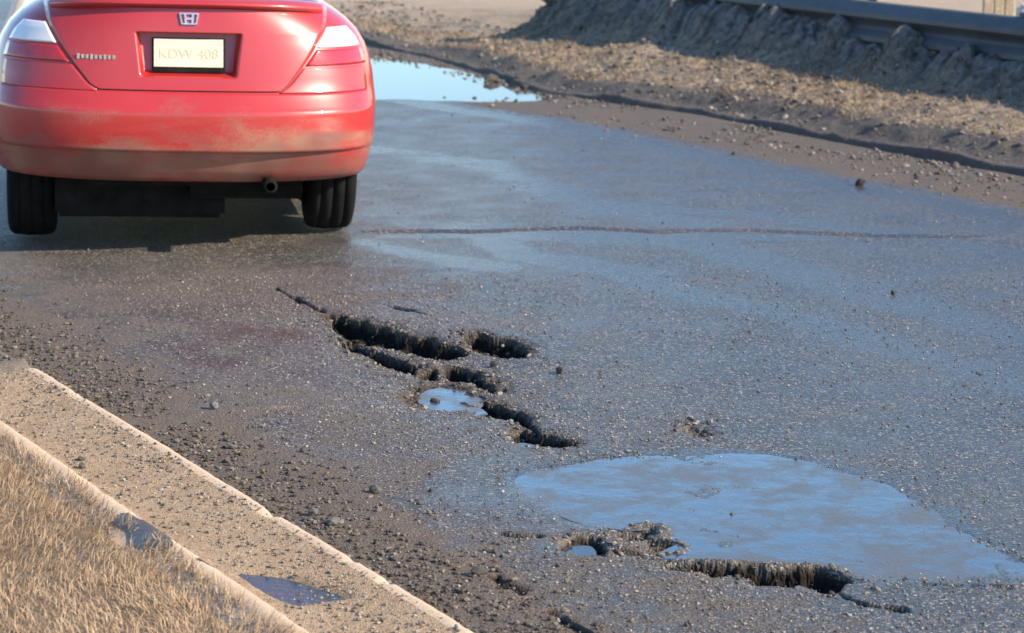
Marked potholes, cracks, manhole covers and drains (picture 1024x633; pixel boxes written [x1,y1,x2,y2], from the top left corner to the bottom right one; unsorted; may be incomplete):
pothole [646,538,684,555]
pothole [680,425,711,438]
crack [279,289,320,313]
pothole [556,534,607,556]
pothole [484,381,506,394]
pothole [460,332,530,359]
pothole [660,558,853,598]
pothole [339,341,422,376]
pothole [416,368,440,381]
pothole [609,523,659,541]
pothole [512,429,578,448]
pothole [402,385,484,408]
